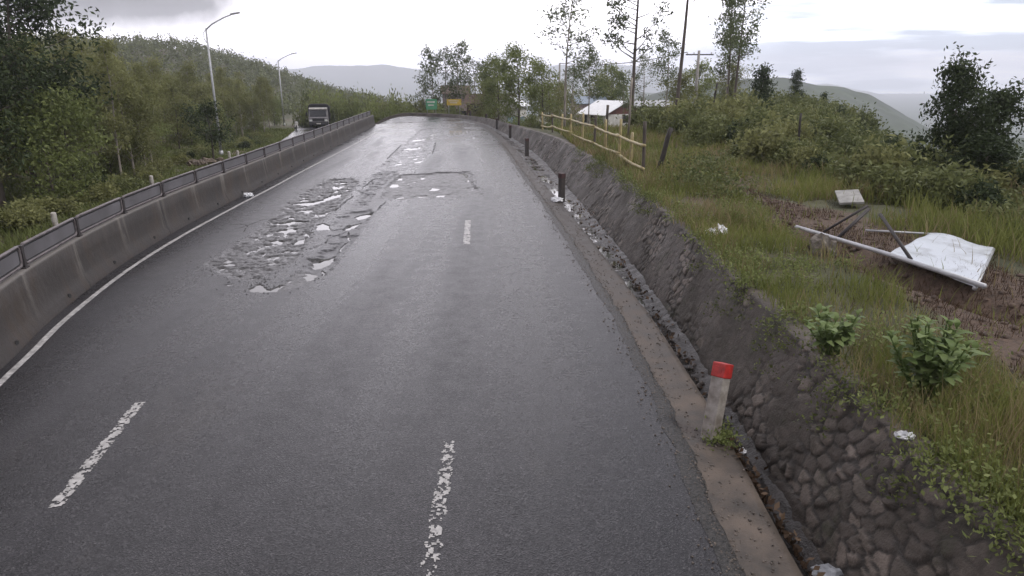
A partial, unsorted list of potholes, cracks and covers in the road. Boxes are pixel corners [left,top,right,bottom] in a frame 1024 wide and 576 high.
pothole [290,193,342,206]
pothole [248,272,318,293]
pothole [307,256,337,270]
crack [203,145,401,282]
